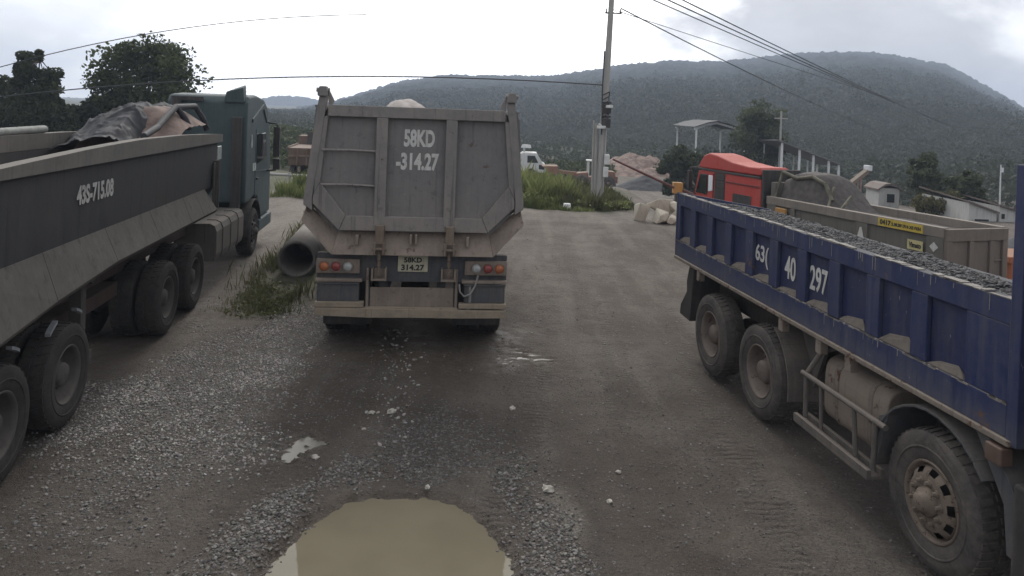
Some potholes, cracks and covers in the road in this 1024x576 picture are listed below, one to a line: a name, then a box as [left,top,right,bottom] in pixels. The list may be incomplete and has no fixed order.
pothole [247,486,529,576]
